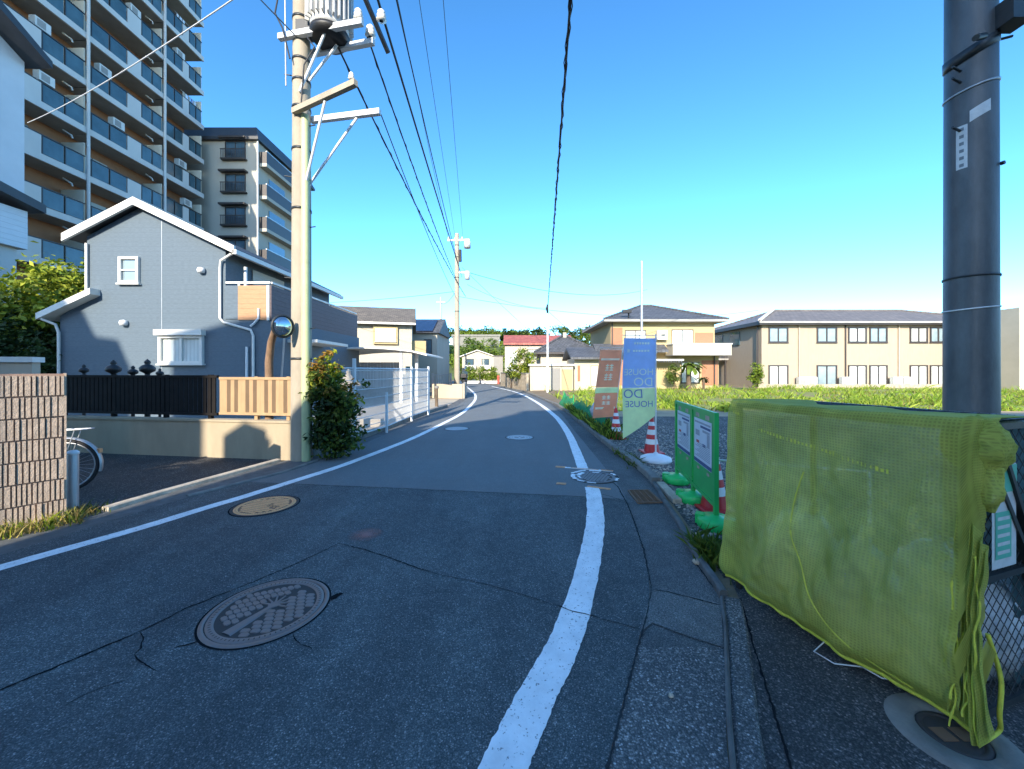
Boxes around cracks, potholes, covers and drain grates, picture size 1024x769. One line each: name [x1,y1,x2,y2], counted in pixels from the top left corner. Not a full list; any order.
manhole cover [228,495,301,517]
crack [0,543,339,703]
drain grate [628,489,663,504]
manhole cover [570,470,619,484]
crack [339,543,639,629]
manhole cover [194,578,331,650]
